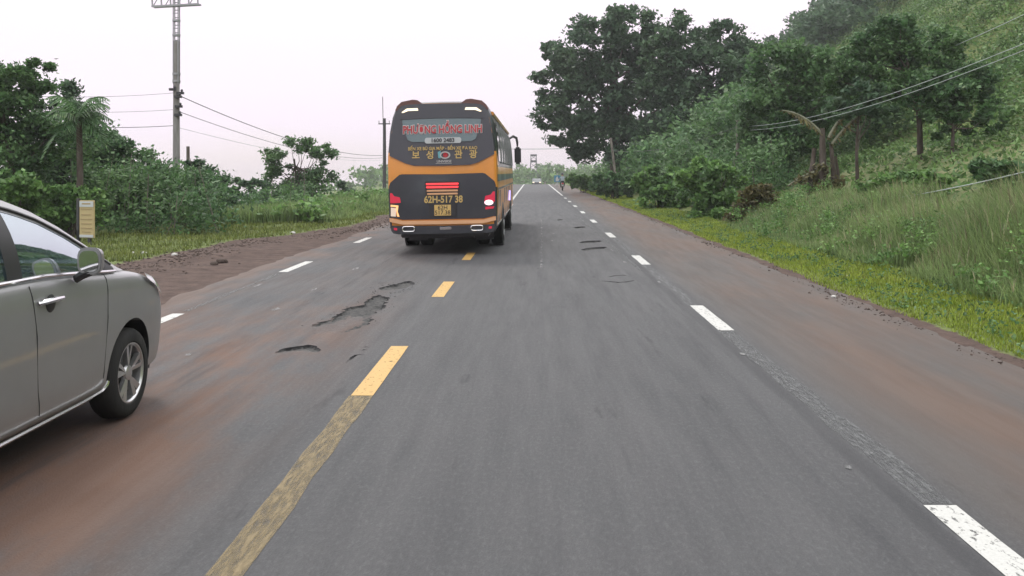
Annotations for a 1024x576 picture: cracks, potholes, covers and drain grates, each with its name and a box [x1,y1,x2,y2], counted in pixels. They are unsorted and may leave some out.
pothole [376,281,415,293]
pothole [310,295,390,334]
pothole [274,345,321,355]
